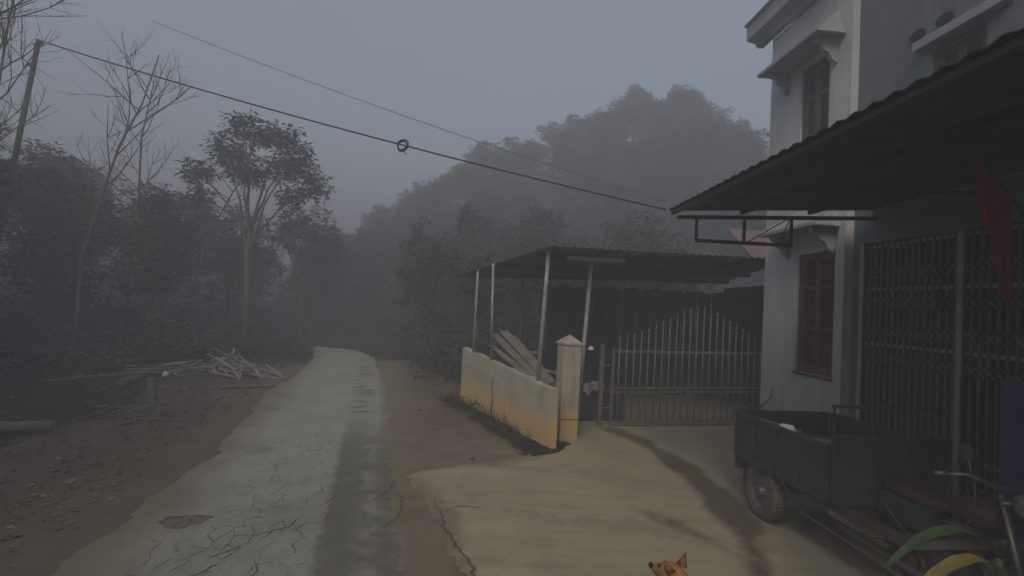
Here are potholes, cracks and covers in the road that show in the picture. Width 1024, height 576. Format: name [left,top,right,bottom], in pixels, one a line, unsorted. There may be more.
pothole [158,514,213,529]
crack [351,367,374,413]
crack [434,499,481,576]
crack [126,429,360,576]
crack [362,476,404,528]
